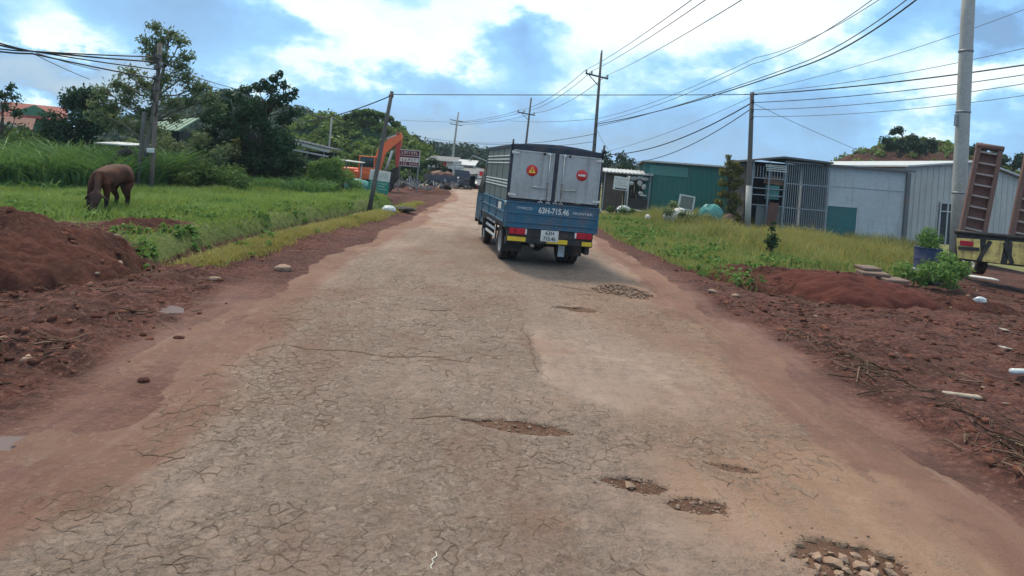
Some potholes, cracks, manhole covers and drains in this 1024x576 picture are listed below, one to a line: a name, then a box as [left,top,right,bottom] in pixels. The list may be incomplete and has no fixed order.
pothole [695,459,772,479]
crack [648,421,847,506]
pothole [585,282,667,304]
crack [322,511,717,576]
pothole [446,415,601,442]
pothole [651,491,744,523]
crack [122,268,549,482]
crack [5,478,337,576]
pothole [548,305,607,315]
crack [556,277,716,338]
crack [359,381,655,481]
pothole [585,471,684,502]
